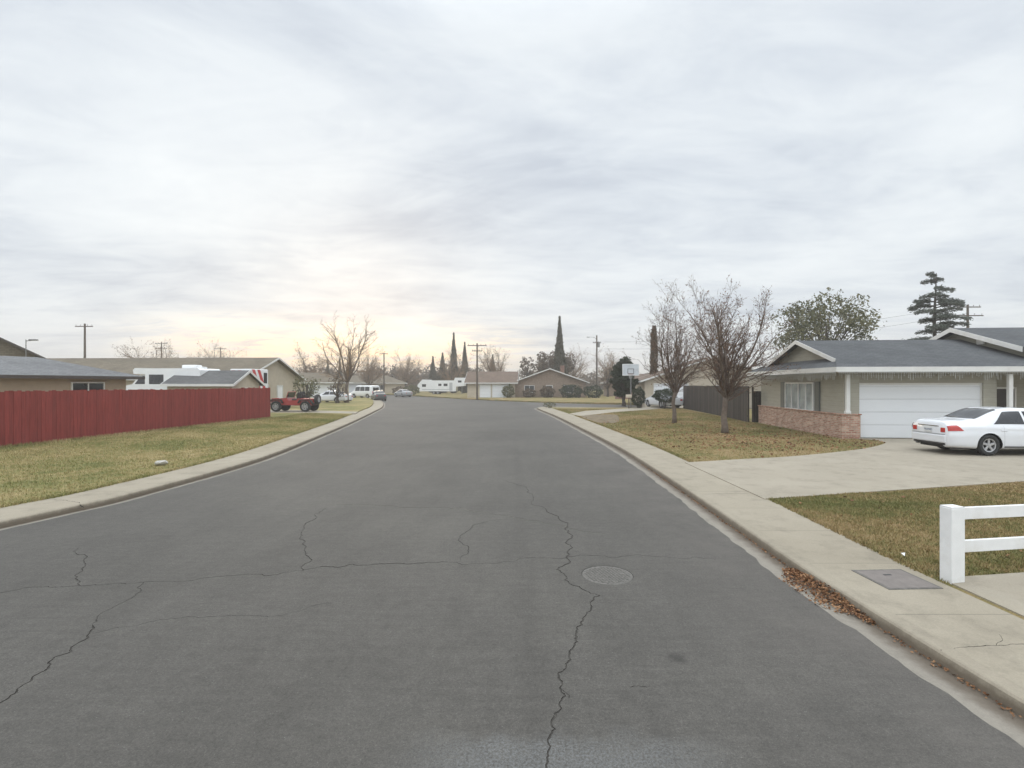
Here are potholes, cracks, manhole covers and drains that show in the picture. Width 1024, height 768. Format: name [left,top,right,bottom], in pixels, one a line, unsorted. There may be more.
crack [0,481,708,768]
manhole cover [579,565,636,585]
utility cover [851,569,943,590]
